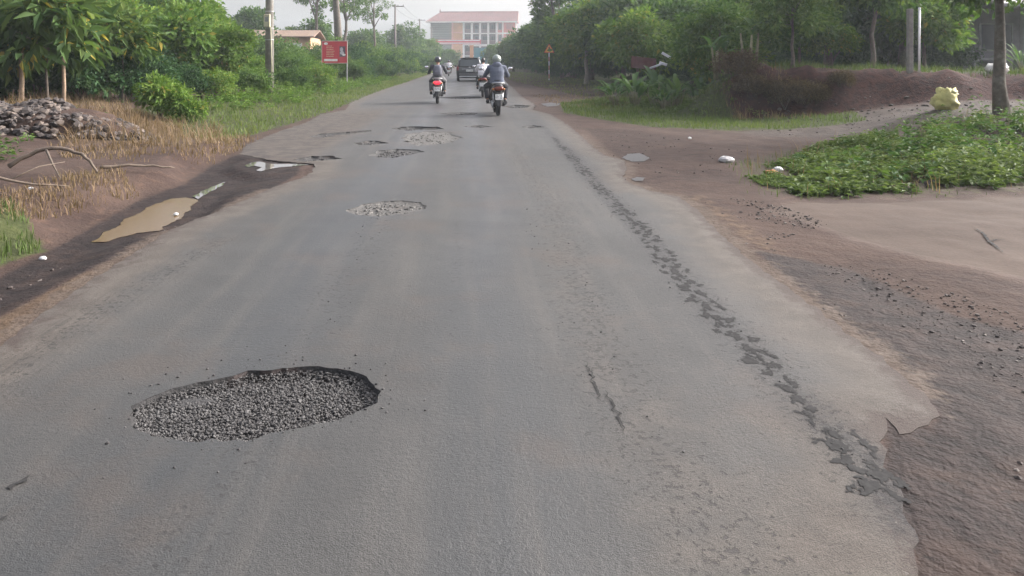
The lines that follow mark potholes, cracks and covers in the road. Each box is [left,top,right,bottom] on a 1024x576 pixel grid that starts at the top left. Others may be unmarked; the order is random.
pothole [310,130,371,138]
pothole [368,149,424,158]
pothole [94,346,427,479]
pothole [403,131,461,146]
crack [555,140,912,503]
pothole [346,201,426,216]
